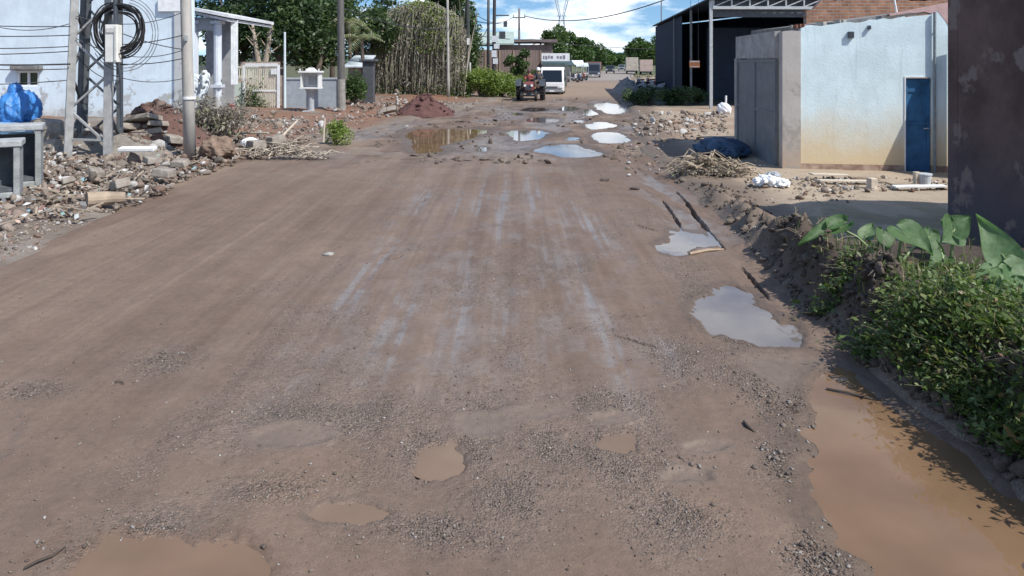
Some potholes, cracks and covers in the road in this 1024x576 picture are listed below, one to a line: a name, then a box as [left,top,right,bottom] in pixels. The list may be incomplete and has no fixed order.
pothole [681,281,825,356]
pothole [583,131,636,143]
pothole [759,353,1024,576]
pothole [526,143,620,159]
pothole [650,228,729,256]
pothole [405,434,484,482]
pothole [580,429,639,455]
pothole [499,128,556,142]
crack [636,192,726,250]
pothole [587,102,629,115]
pothole [240,418,337,452]
pothole [394,127,500,154]
